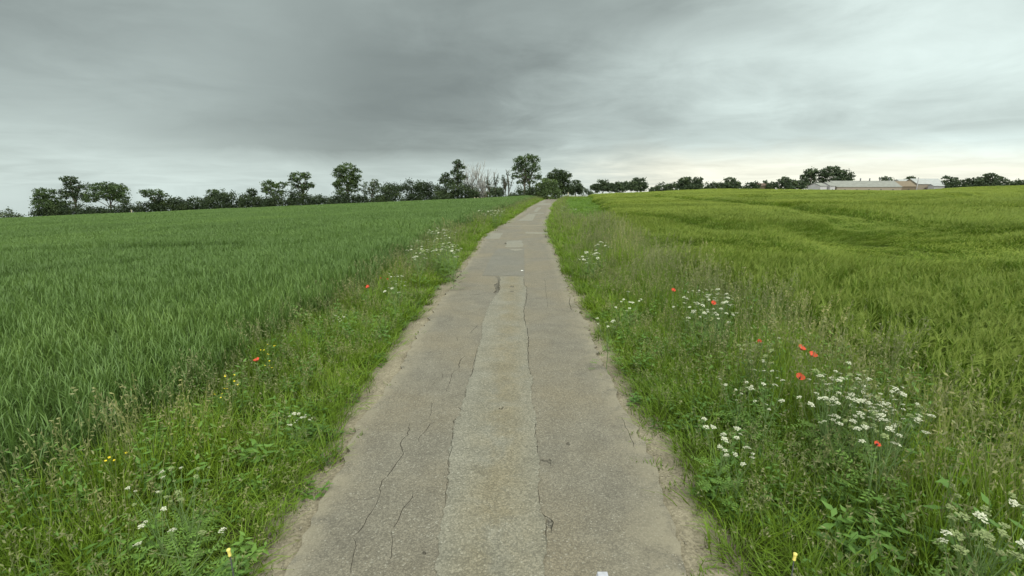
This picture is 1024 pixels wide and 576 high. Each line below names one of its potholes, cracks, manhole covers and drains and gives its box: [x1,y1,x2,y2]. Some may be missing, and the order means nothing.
crack [350,325,478,569]
